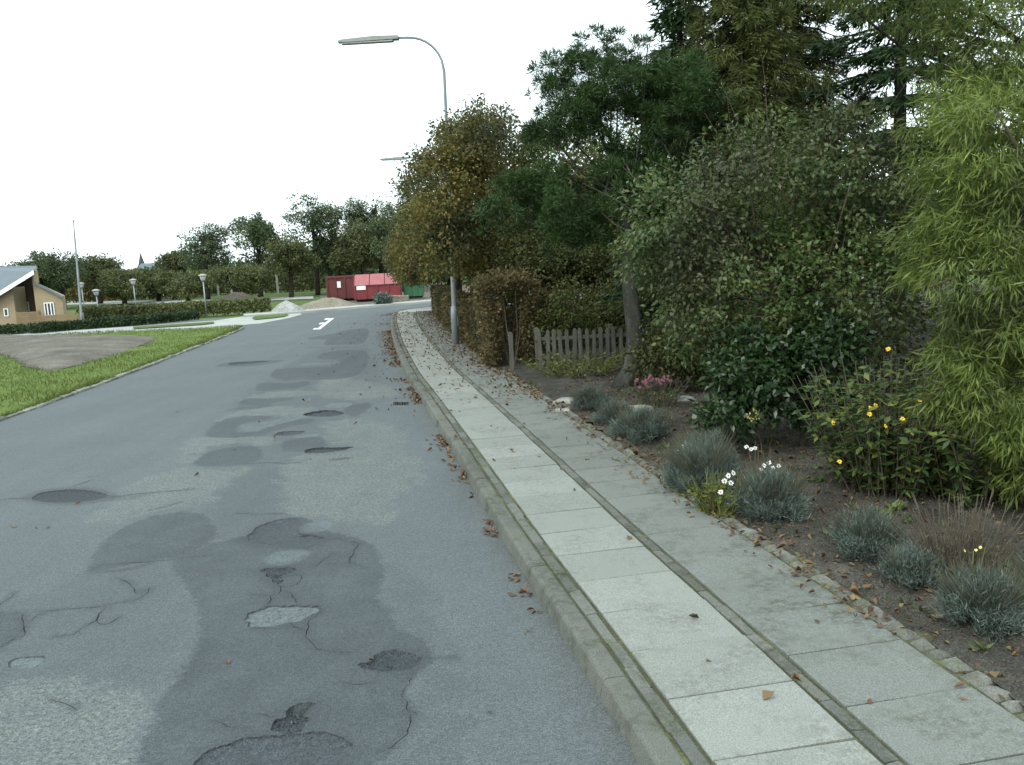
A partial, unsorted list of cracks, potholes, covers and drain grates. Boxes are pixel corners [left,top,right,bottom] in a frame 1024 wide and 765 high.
pothole [270,702,316,735]
pothole [193,731,353,765]
pothole [260,567,296,584]
pothole [32,489,108,503]
pothole [358,649,422,672]
pothole [8,656,46,668]
crack [251,540,367,653]
crack [391,679,416,748]
pothole [243,604,321,627]
crack [52,555,207,638]
